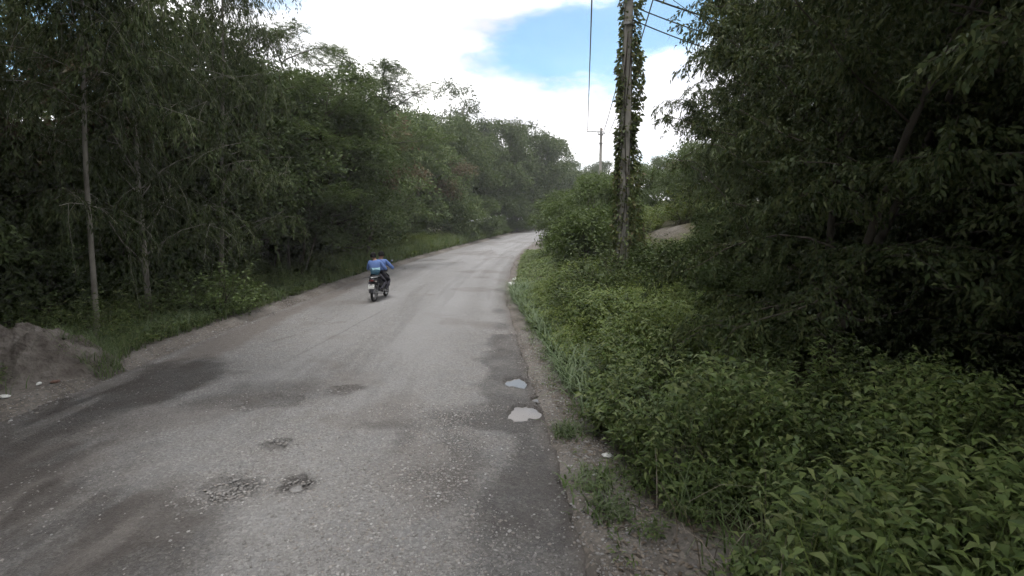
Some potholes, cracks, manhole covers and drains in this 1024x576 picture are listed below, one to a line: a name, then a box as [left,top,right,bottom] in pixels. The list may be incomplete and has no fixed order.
pothole [273,472,320,495]
pothole [499,375,532,390]
pothole [195,474,267,505]
pothole [255,436,296,452]
pothole [501,402,545,424]
